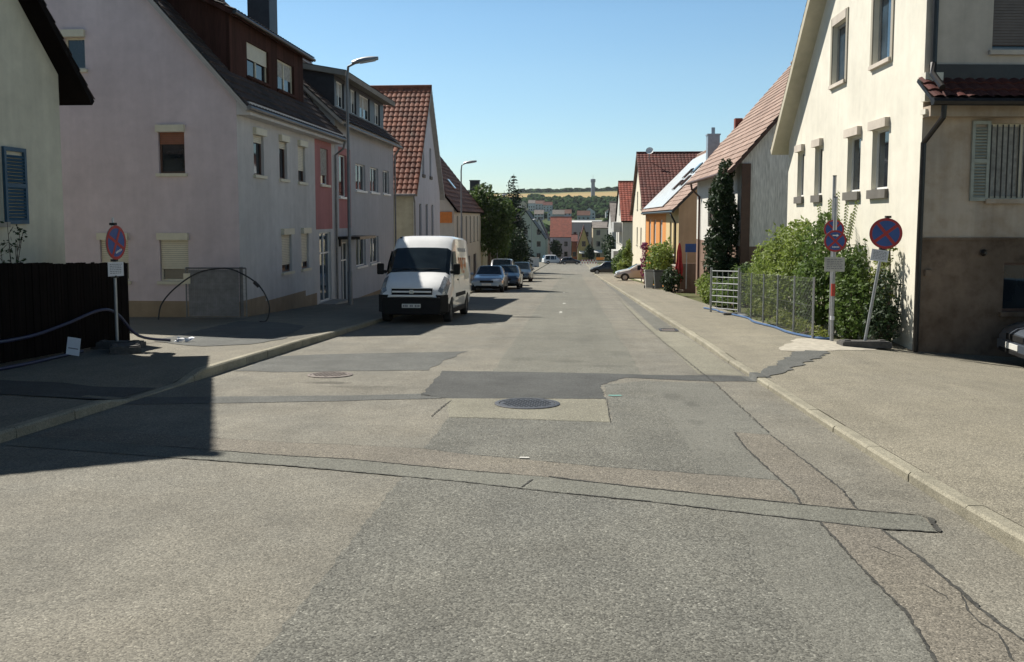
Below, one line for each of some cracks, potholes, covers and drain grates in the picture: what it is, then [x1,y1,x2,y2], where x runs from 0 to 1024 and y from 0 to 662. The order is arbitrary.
crack [820,521,1024,662]
manhole cover [494,398,560,409]
